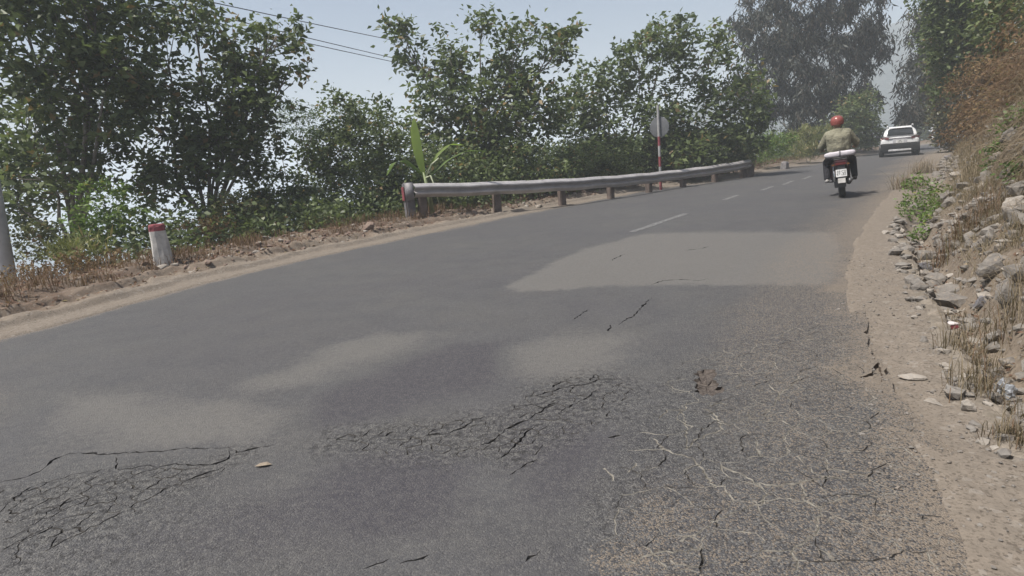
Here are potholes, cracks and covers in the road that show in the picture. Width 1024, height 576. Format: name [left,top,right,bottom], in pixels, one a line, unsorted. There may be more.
pothole [694,369,724,396]
crack [324,374,633,475]
crack [0,444,274,564]
